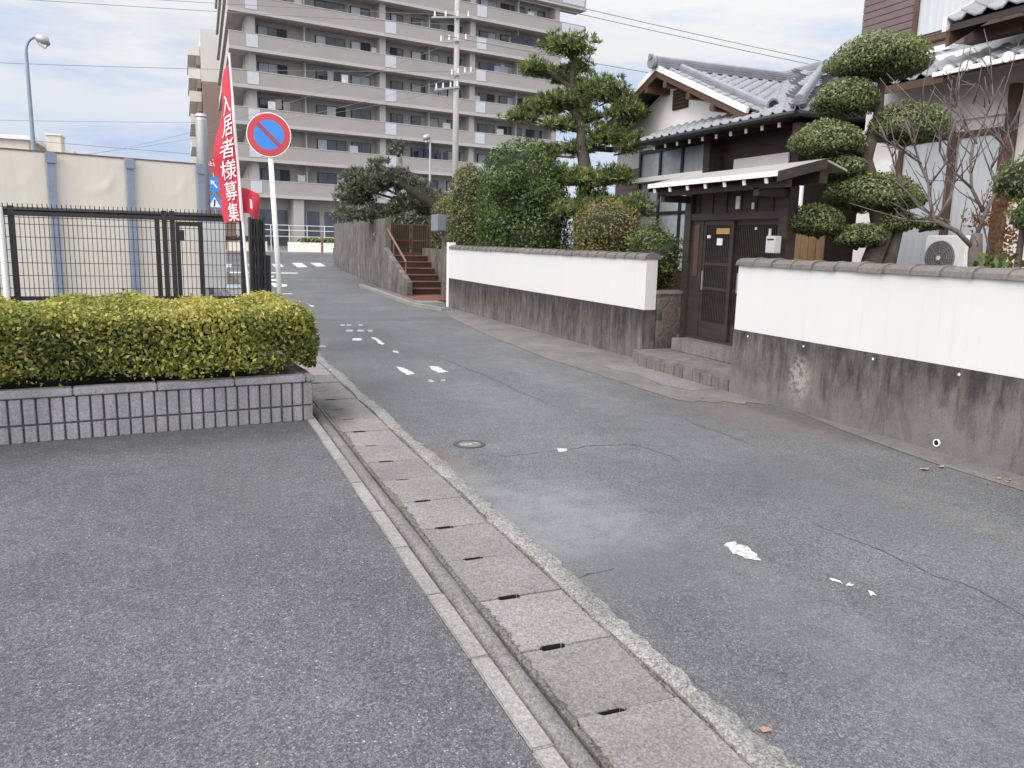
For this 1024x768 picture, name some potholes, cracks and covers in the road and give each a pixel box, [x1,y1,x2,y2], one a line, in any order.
manhole cover [454,440,485,448]
